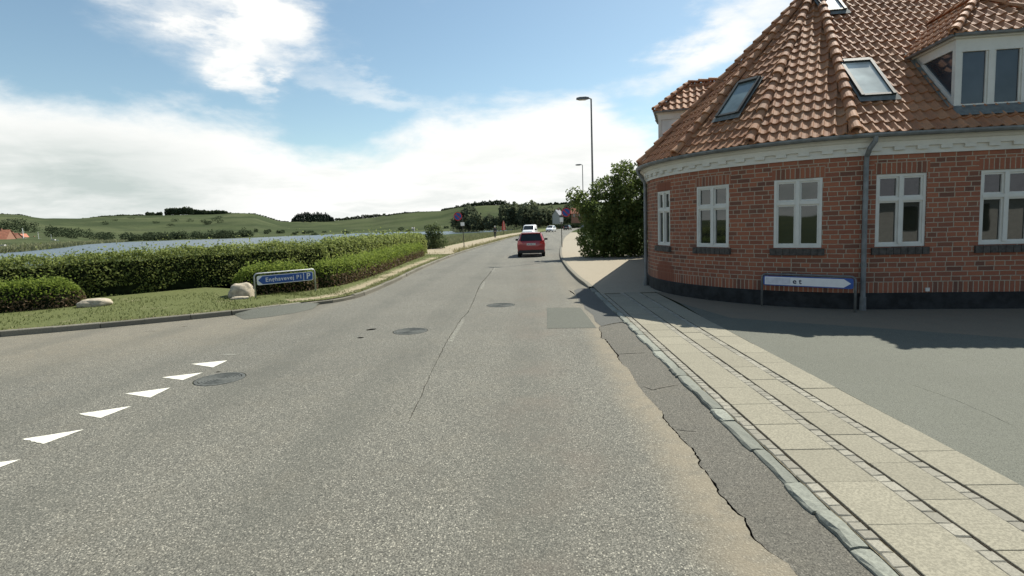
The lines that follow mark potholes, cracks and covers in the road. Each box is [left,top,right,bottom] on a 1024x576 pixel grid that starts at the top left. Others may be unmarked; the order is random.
crack [601,332,797,575]
manhole cover [193,372,246,386]
crack [410,268,494,419]
